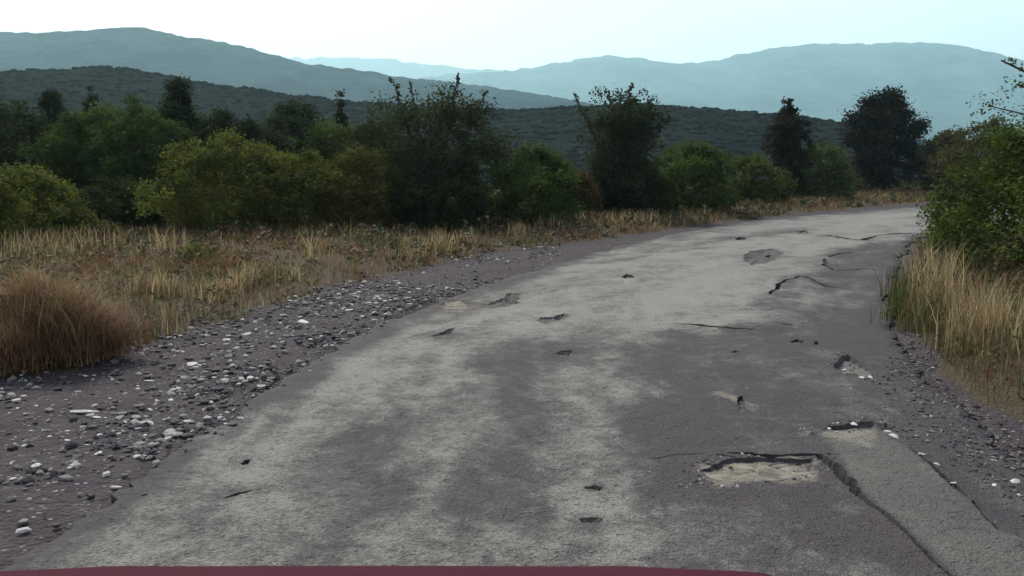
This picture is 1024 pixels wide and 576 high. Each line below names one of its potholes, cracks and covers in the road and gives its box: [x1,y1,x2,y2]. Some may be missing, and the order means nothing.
pothole [743,249,784,265]
pothole [483,293,521,309]
pothole [537,313,569,324]
crack [769,233,916,294]
crack [654,447,999,576]
crack [691,316,792,330]
pothole [825,421,900,436]
crack [224,489,259,498]
pothole [579,517,603,526]
pothole [701,457,814,482]
pothole [833,355,873,378]
